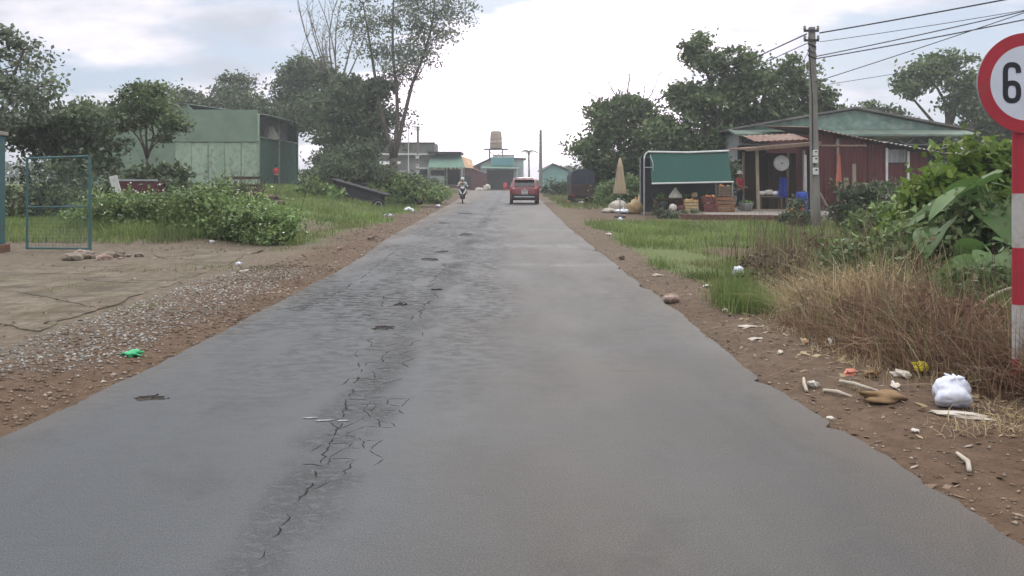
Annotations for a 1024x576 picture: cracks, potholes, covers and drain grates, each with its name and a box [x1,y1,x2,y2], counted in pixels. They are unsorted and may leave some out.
crack [262,250,454,558]
